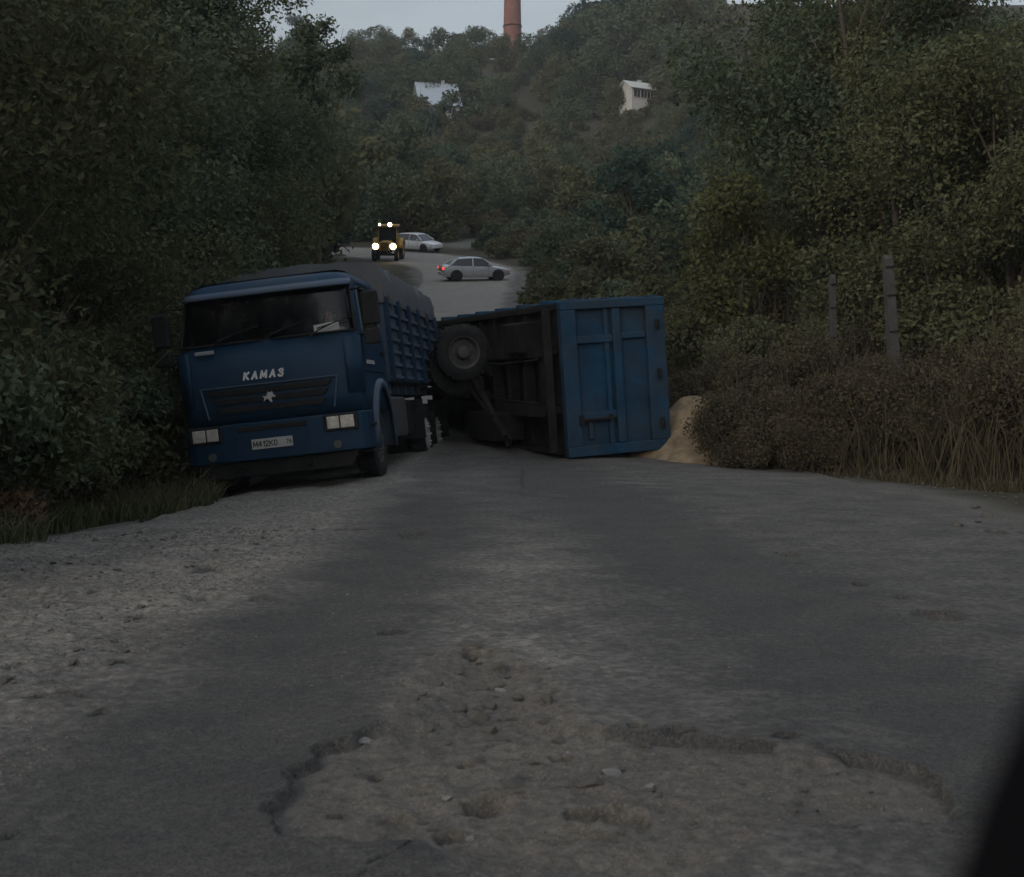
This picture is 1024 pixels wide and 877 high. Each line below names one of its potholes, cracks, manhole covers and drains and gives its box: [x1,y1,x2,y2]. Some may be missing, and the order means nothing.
pothole [237,641,981,877]
pothole [149,558,254,577]
pothole [897,608,980,624]
